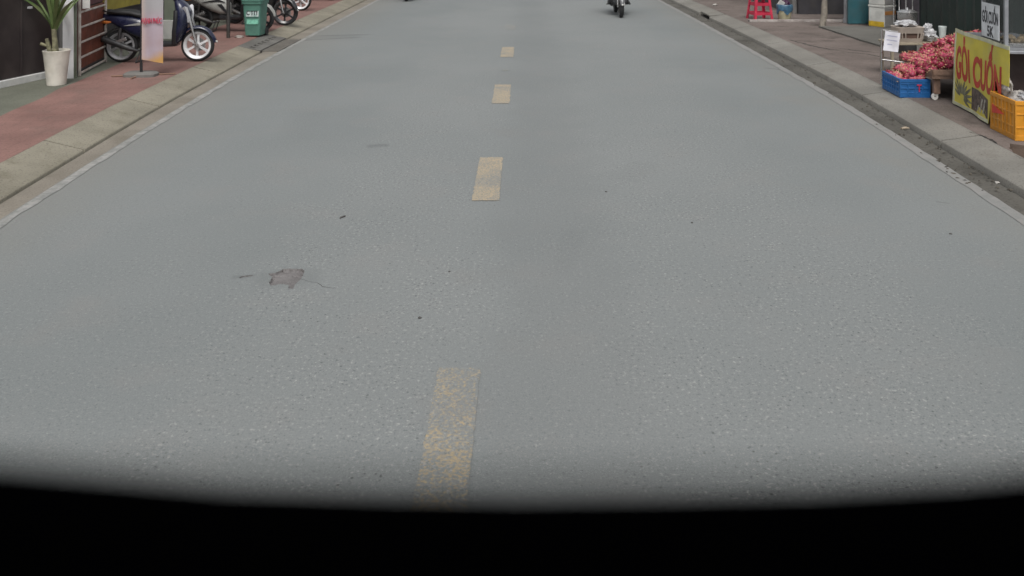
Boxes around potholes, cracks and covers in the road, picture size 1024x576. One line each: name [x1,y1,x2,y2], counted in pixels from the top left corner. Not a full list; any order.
pothole [269,269,304,289]
drain grate [239,34,301,53]
